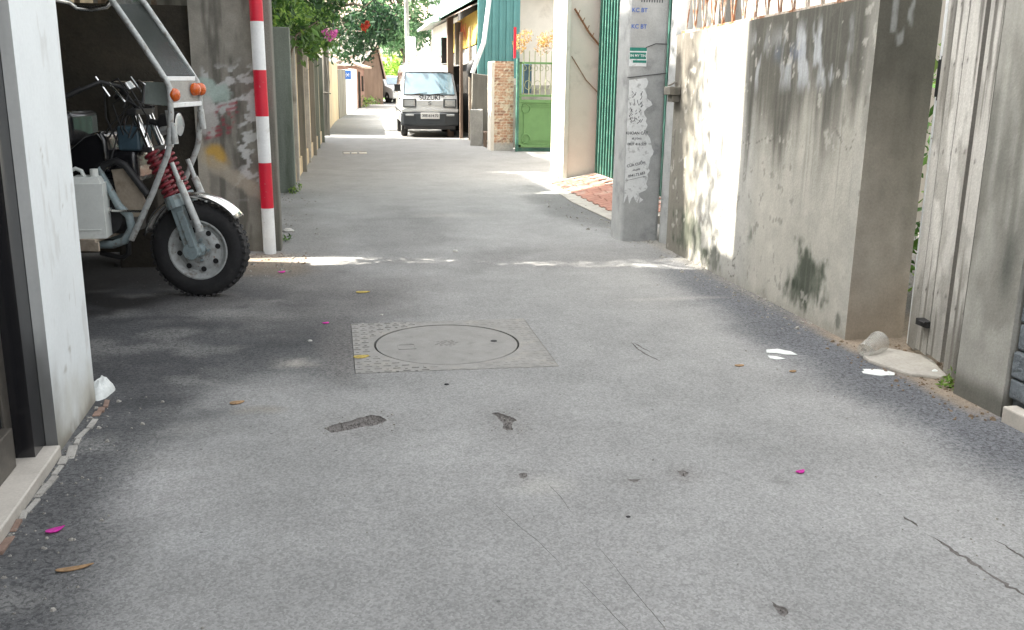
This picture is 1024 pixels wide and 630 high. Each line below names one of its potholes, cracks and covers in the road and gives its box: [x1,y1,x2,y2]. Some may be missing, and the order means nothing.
manhole cover [351,318,558,374]
pothole [326,415,386,433]
crack [491,485,666,630]
crack [904,517,1024,595]
pothole [492,412,517,430]
